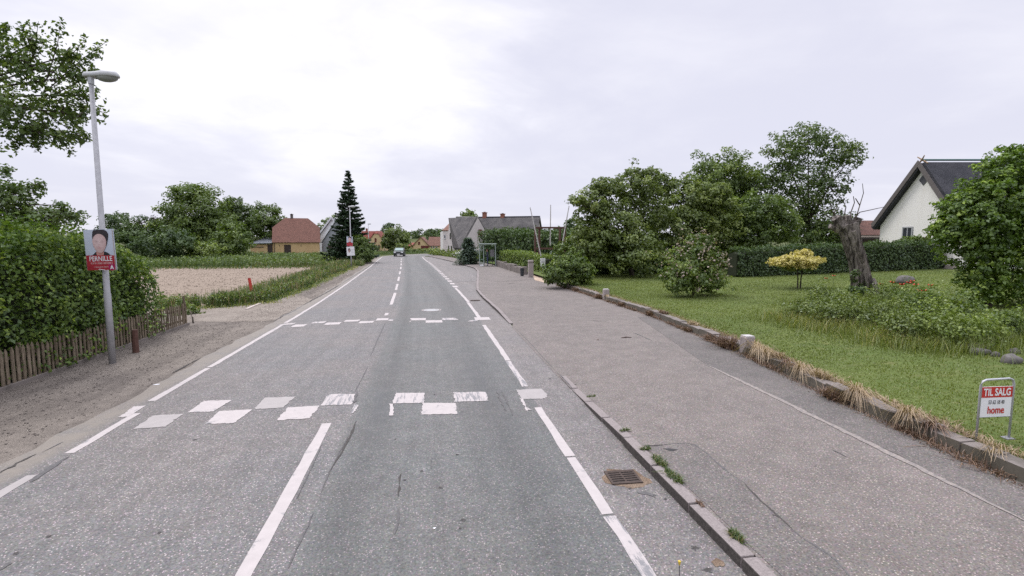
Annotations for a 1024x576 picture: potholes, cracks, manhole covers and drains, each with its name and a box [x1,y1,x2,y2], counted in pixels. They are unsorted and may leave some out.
crack [297,435,349,498]
drain grate [604,469,643,485]
crack [394,473,402,534]
